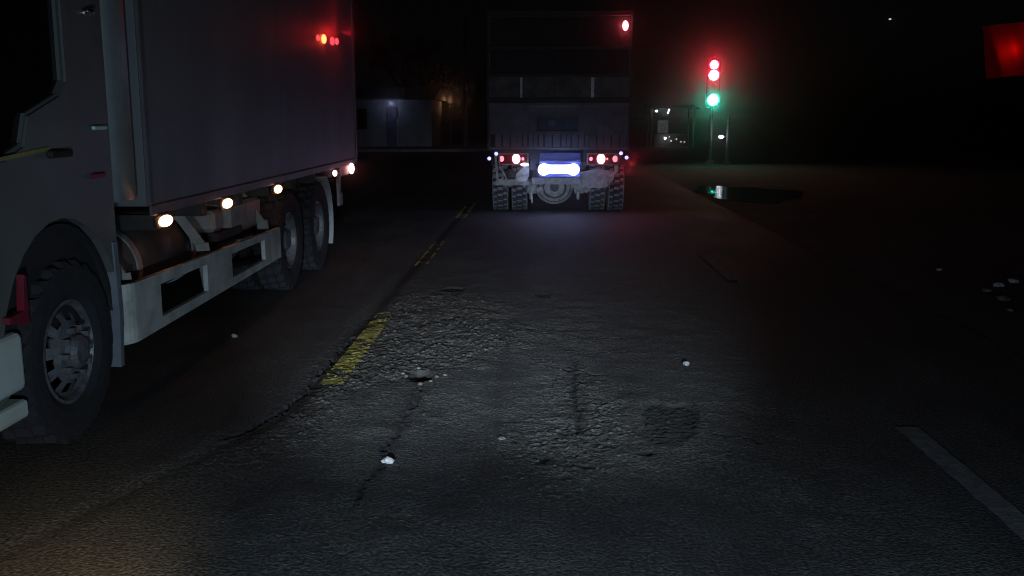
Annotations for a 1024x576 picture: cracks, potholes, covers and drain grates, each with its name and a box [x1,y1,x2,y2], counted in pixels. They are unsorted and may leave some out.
crack [218,336,424,506]
pothole [403,370,438,384]
crack [528,337,631,436]
pothole [636,398,704,449]
